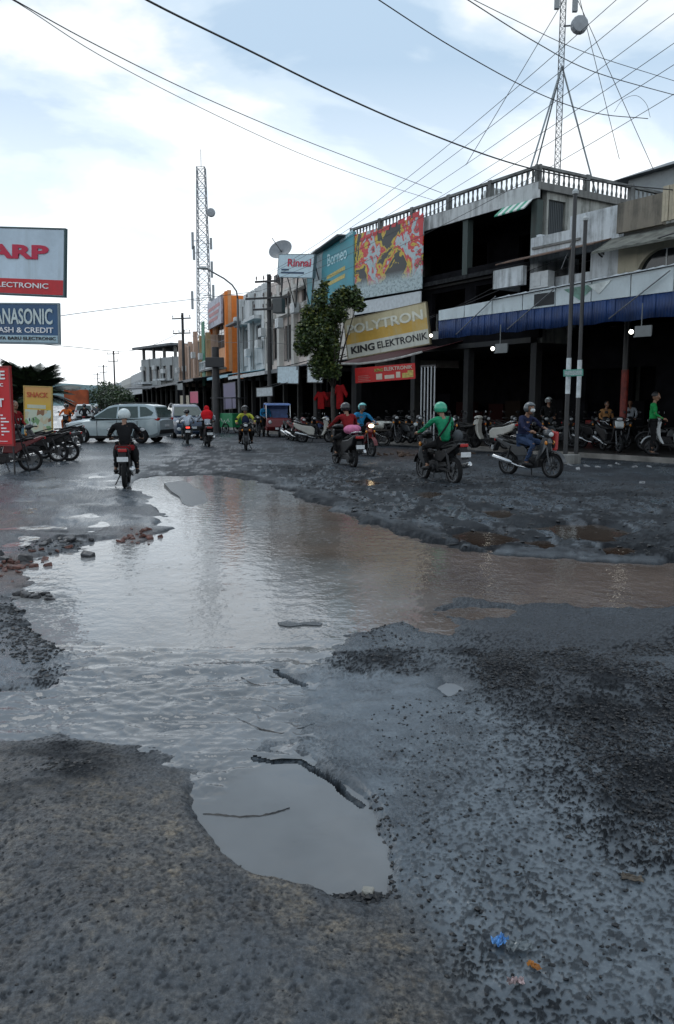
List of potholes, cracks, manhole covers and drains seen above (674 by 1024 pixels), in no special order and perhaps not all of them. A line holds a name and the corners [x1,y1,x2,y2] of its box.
pothole [10,473,674,669]
pothole [188,755,396,905]
pothole [432,676,474,696]
